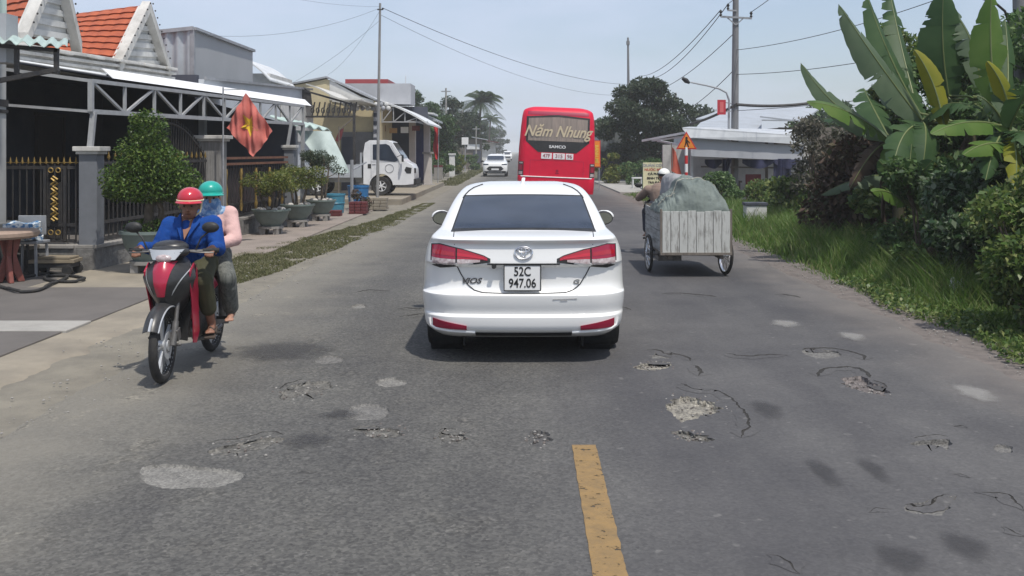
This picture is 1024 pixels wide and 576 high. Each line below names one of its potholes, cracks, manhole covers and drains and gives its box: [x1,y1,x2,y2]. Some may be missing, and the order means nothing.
crack [868,472,1024,536]
crack [645,347,894,438]
pothole [329,419,421,447]
pothole [259,377,352,406]
pothole [182,432,310,462]
pothole [616,358,690,375]
pothole [785,346,857,363]
pothole [822,373,910,401]
pothole [885,434,974,458]
pothole [645,392,735,427]
